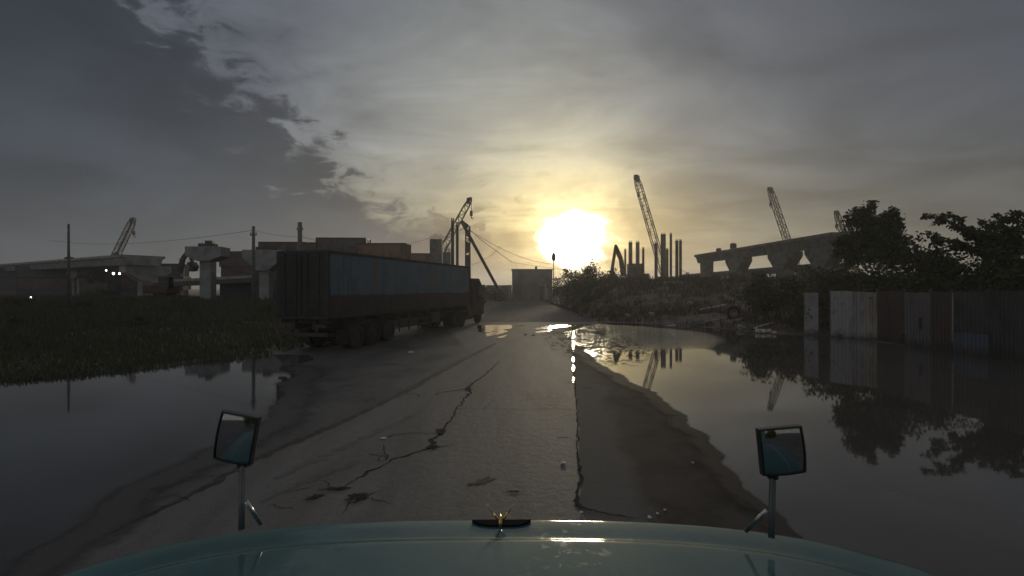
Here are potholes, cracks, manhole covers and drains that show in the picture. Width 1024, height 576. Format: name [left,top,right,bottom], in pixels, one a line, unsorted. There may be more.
crack [274,360,499,512]
